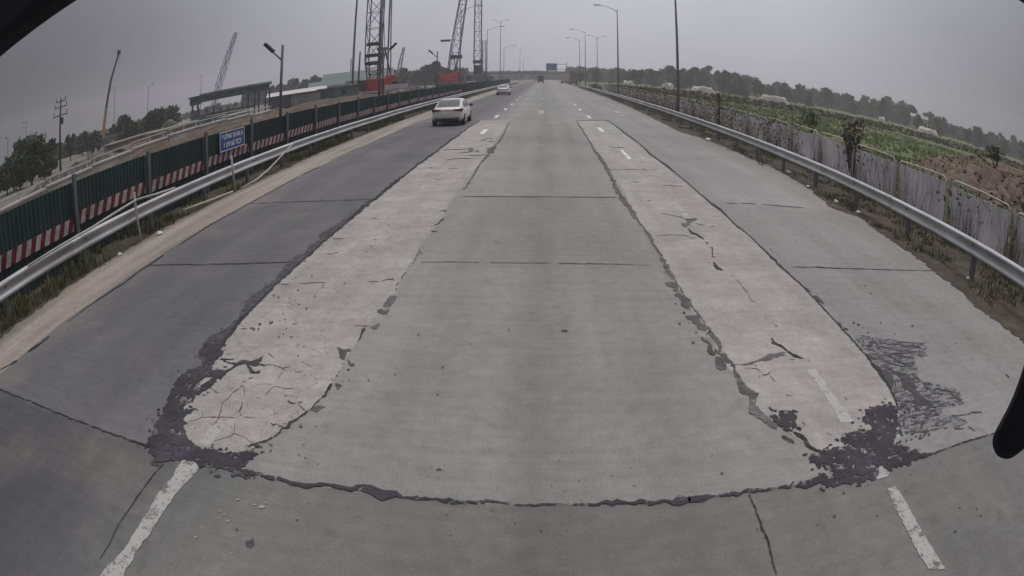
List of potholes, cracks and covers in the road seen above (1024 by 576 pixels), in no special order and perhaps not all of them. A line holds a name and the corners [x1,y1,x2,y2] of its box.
crack [733,338,810,400]
crack [749,493,777,574]
crack [647,200,716,257]
crack [187,345,309,442]
